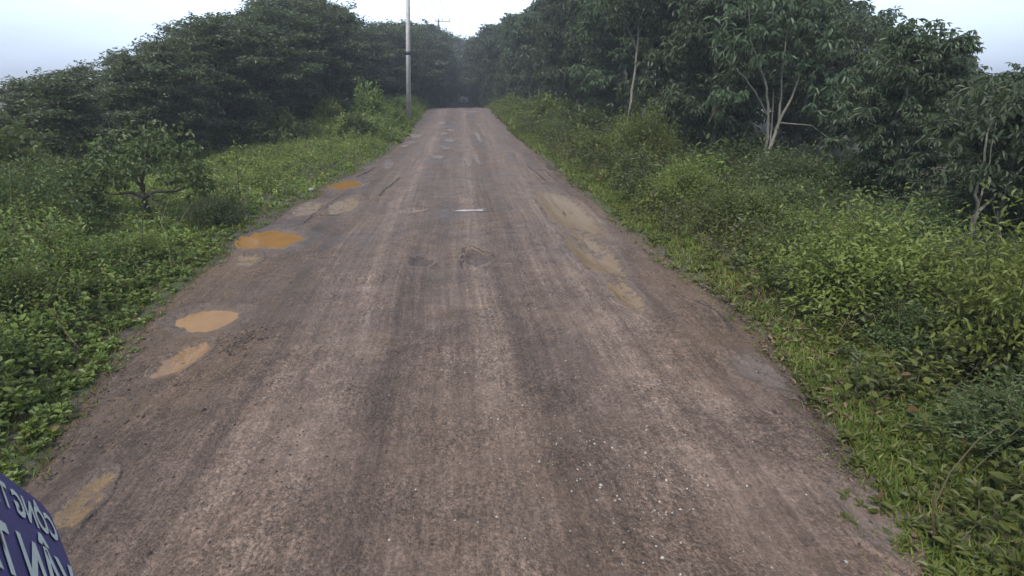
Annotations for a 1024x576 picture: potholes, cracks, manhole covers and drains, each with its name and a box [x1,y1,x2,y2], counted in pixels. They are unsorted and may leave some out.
pothole [458,246,497,269]
pothole [224,223,324,257]
pothole [151,301,262,339]
pothole [597,272,655,323]
pothole [139,335,219,386]
pothole [525,184,628,260]
pothole [404,254,440,270]
pothole [50,461,123,542]
pothole [552,226,642,294]
pothole [317,178,372,192]
